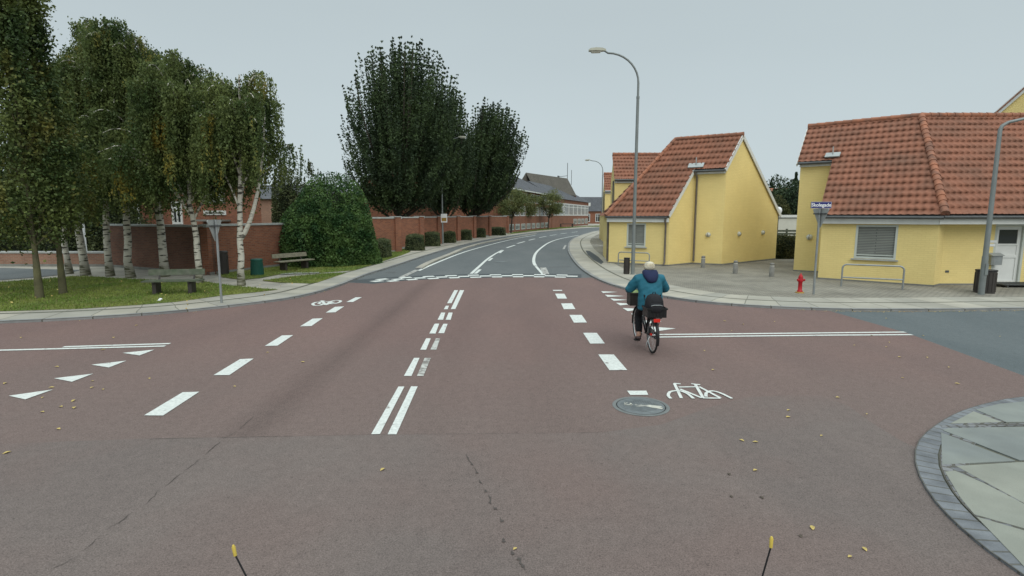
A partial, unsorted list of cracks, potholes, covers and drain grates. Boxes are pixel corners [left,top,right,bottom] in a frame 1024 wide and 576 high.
manhole cover [612,396,670,416]
crack [54,420,587,568]
